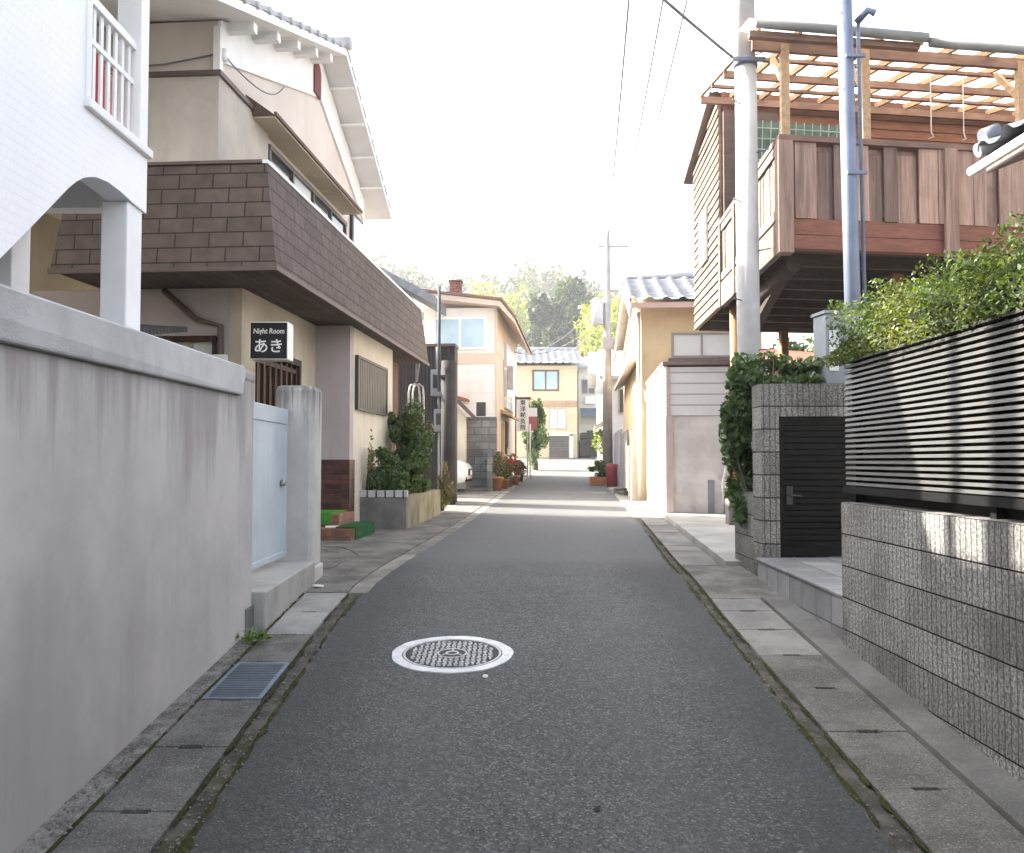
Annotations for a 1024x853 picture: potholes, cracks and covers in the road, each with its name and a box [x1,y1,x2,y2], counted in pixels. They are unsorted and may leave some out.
manhole cover [392,636,514,674]
drain grate [201,662,290,704]
